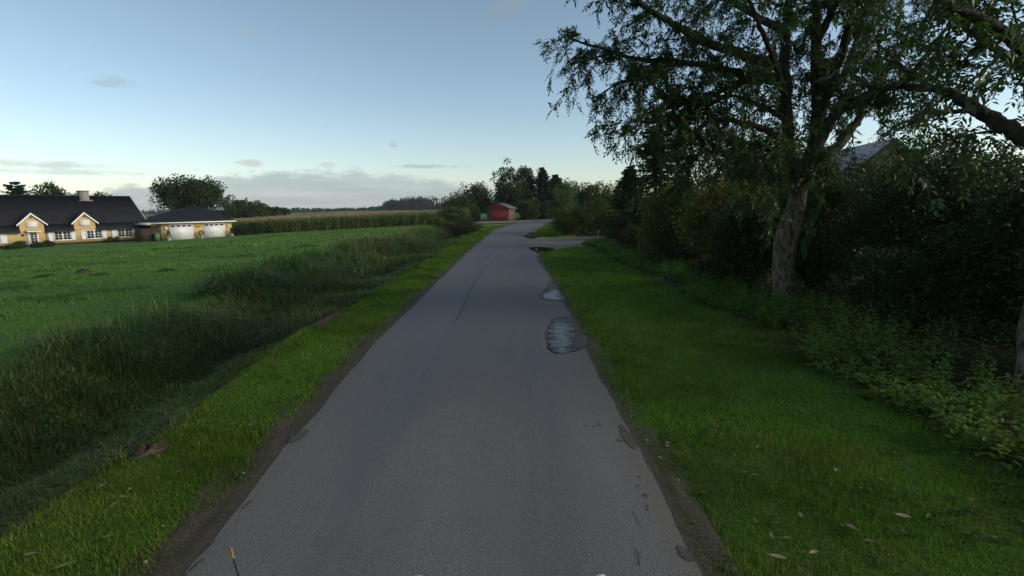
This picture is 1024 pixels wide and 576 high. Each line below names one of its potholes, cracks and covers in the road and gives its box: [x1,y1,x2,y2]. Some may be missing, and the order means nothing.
pothole [287,429,308,444]
pothole [677,545,695,561]
pothole [619,424,638,449]
pothole [545,315,589,353]
pothole [540,281,568,303]
